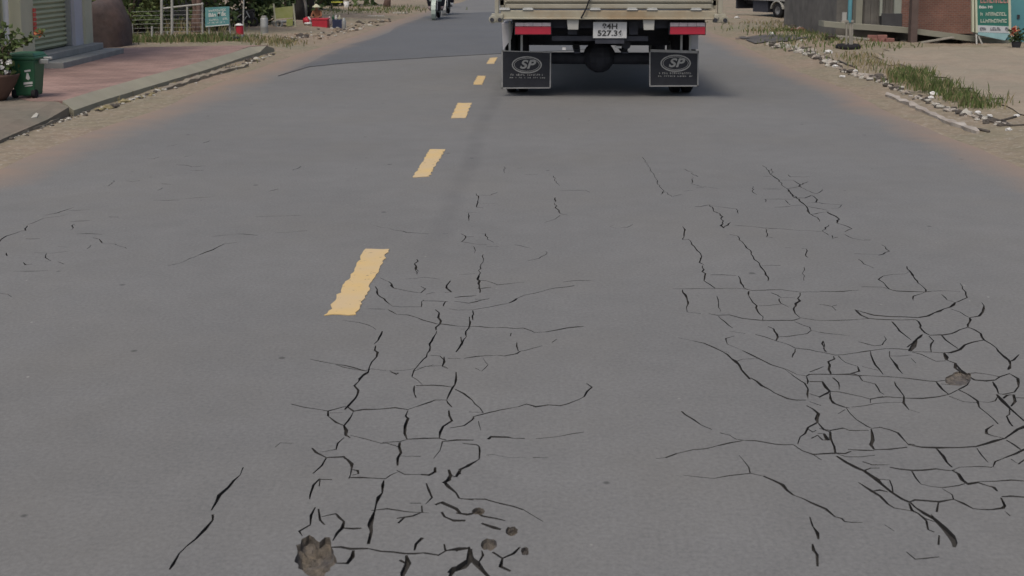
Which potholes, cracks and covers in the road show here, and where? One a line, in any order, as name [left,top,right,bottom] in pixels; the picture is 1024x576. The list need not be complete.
crack [0,208,126,271]
pothole [294,535,337,576]
pothole [945,371,971,386]
crack [169,467,244,570]
crack [656,205,1024,567]
pothole [481,538,497,551]
crack [278,193,593,576]
